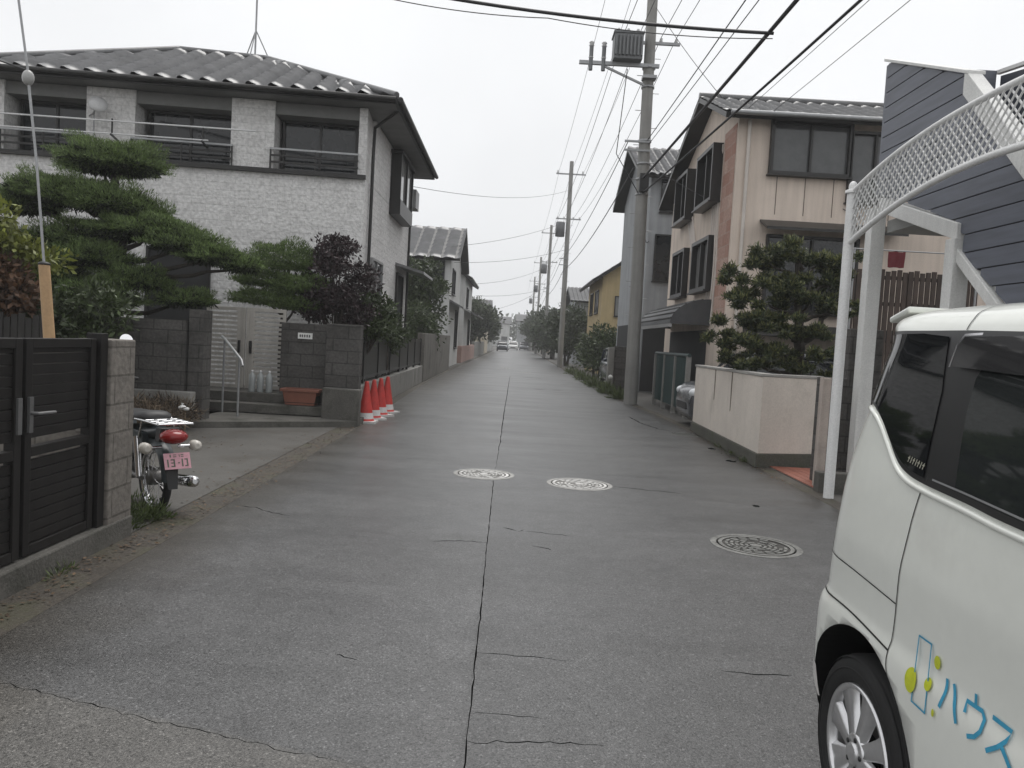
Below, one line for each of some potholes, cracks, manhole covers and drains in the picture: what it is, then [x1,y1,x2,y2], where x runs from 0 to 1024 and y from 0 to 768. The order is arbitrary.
crack [0,683,367,768]
manhole cover [547,478,613,491]
crack [460,482,605,768]
manhole cover [710,534,803,558]
manhole cover [453,469,514,482]
